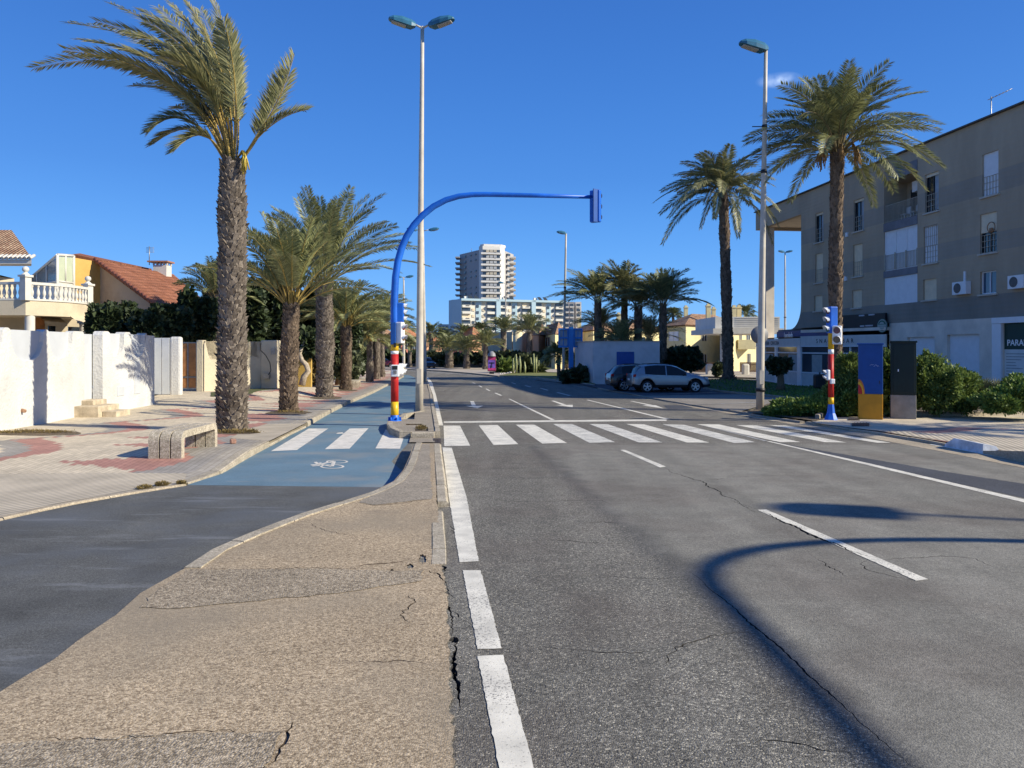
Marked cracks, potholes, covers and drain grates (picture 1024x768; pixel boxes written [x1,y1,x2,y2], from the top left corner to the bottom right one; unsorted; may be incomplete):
crack [735,739,857,756]
crack [12,722,293,767]
crack [550,632,762,663]
crack [208,559,461,708]
crack [669,471,774,509]
